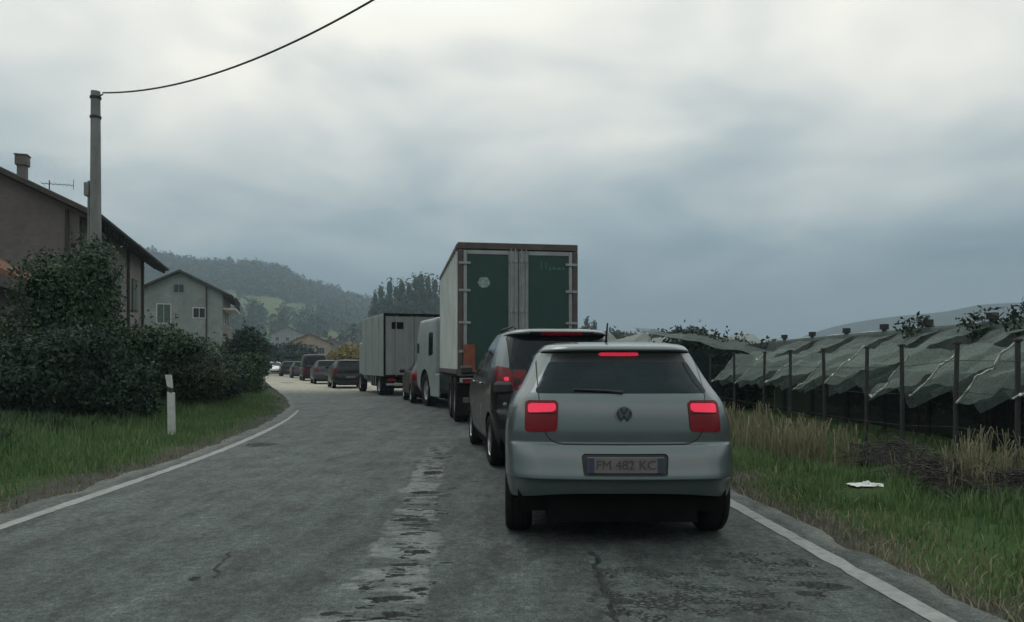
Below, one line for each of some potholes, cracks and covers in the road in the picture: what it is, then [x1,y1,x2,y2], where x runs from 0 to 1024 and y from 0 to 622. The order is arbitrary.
crack [585,551,840,622]
crack [212,552,232,578]
